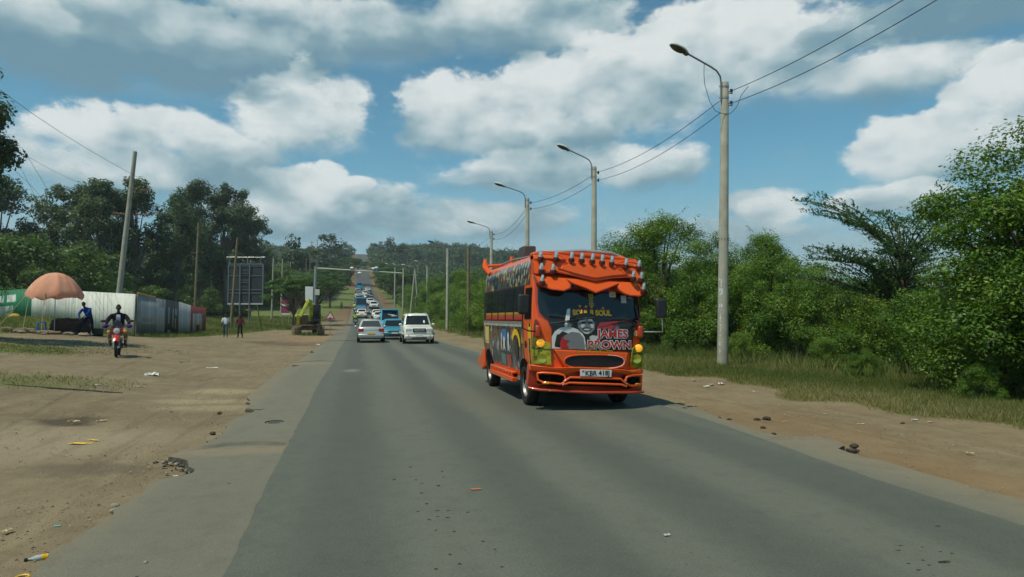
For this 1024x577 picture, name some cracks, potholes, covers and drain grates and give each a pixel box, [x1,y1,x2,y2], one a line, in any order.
pothole [152,457,195,480]
